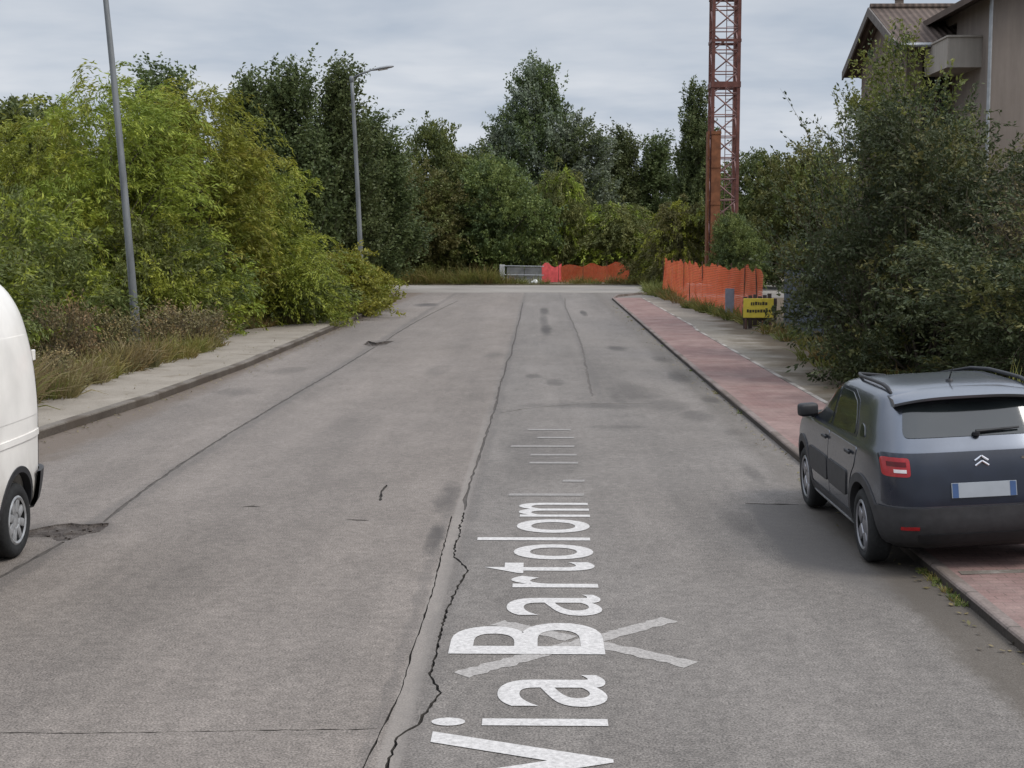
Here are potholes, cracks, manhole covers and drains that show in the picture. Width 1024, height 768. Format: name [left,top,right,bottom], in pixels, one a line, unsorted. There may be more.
pothole [28,523,109,541]
crack [3,303,652,768]
